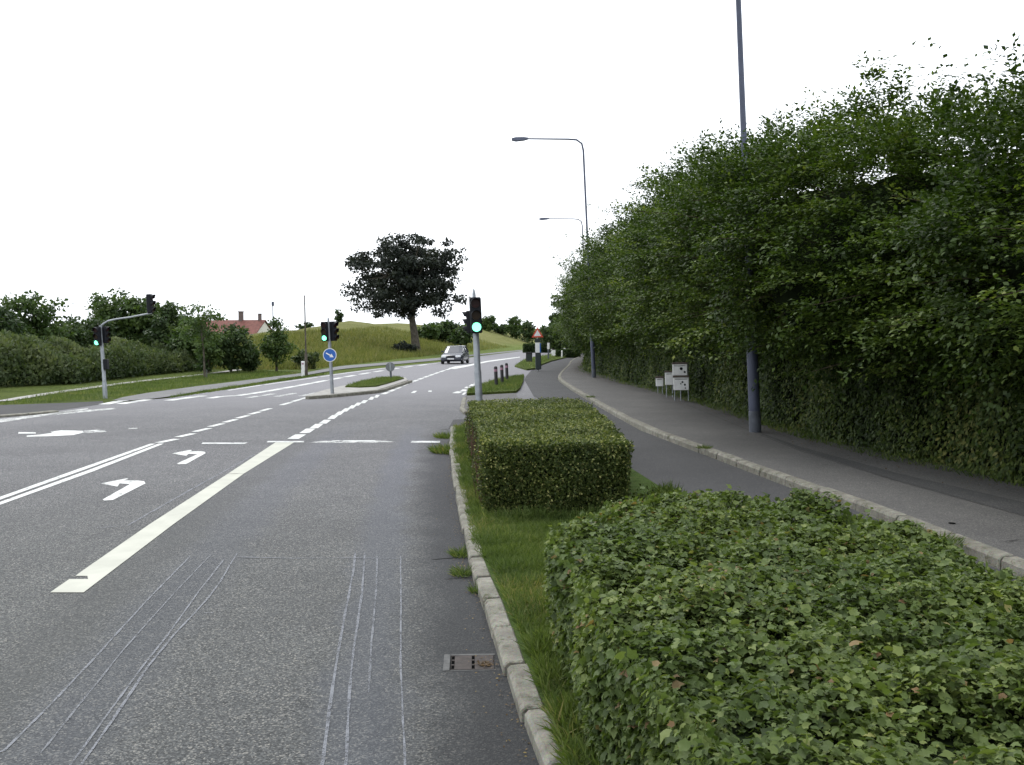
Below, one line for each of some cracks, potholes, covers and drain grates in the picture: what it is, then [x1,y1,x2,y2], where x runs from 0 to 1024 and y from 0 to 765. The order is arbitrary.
drain grate [443,654,498,671]
